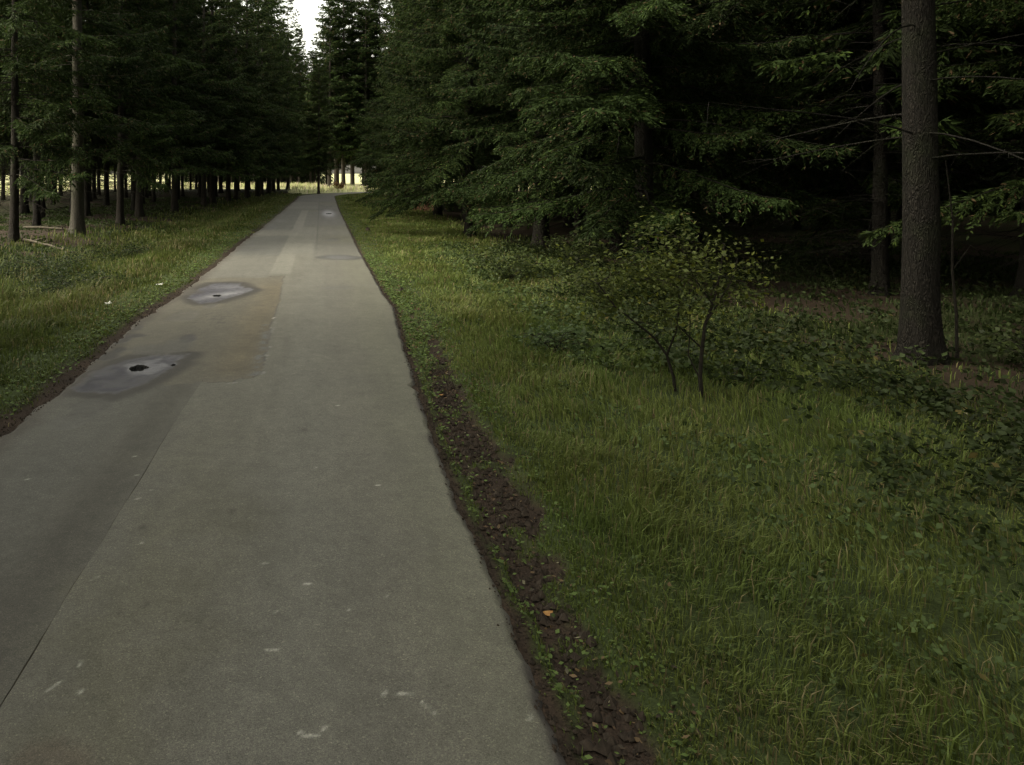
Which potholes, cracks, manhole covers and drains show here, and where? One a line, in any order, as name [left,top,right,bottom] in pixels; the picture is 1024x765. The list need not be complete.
pothole [128,364,151,372]
